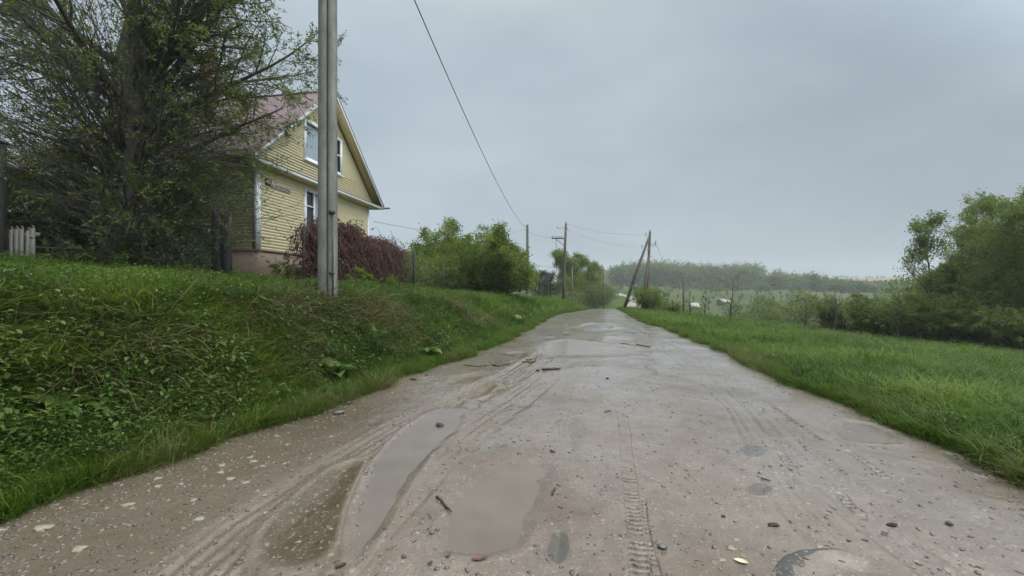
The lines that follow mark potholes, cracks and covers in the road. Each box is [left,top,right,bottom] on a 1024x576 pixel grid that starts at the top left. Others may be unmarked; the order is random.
pothole [775,548,898,576]
pothole [423,455,563,569]
pothole [244,456,369,575]
pothole [544,528,571,567]
pothole [338,407,471,576]
